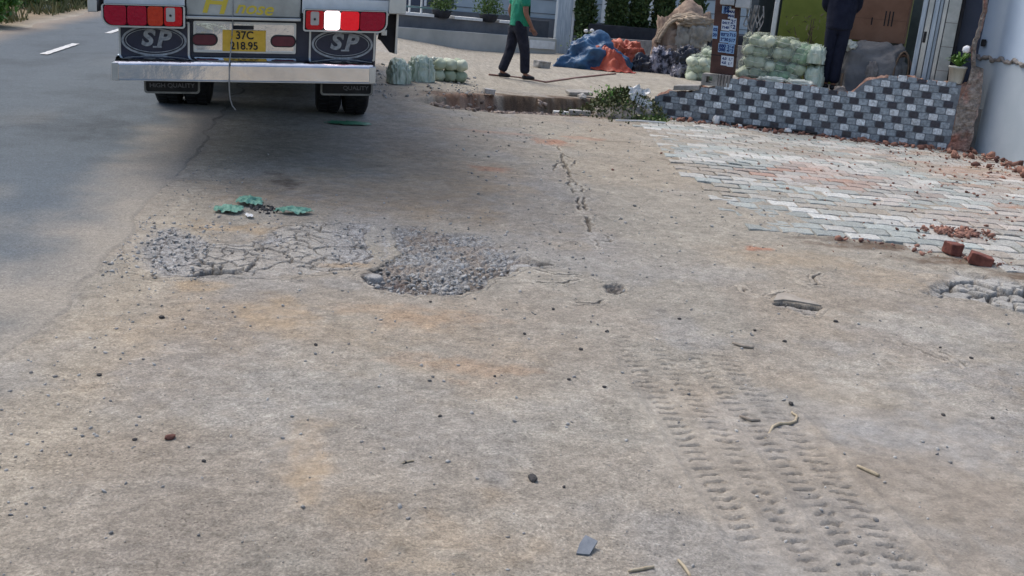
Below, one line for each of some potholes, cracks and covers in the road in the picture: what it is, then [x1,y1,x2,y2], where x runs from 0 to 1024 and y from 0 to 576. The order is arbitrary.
crack [518,136,618,306]
pothole [594,281,635,297]
pothole [353,222,561,299]
